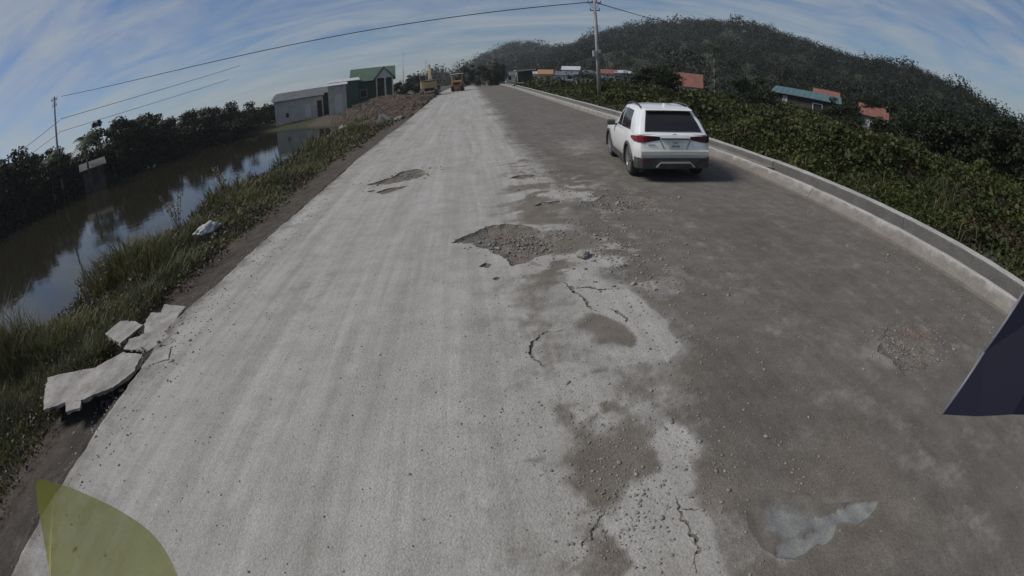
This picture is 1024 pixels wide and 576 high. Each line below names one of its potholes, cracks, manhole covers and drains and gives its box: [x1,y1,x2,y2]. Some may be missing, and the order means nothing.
crack [528,329,565,367]
crack [563,282,629,323]
pothole [376,185,410,194]
pothole [452,224,561,266]
crack [675,495,702,574]
crack [581,510,606,549]
pothole [368,169,425,185]
